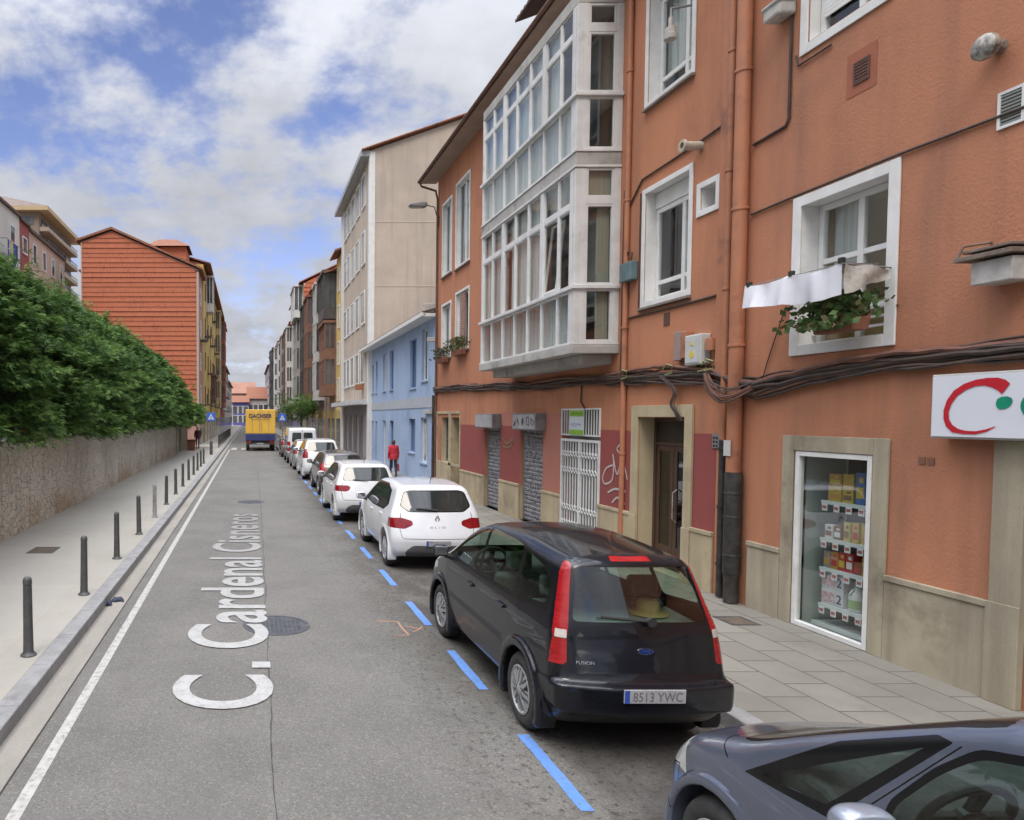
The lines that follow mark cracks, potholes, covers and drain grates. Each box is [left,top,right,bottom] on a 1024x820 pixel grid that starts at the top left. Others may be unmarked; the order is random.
utility cover [712,616,761,625]
manhole cover [243,615,310,636]
